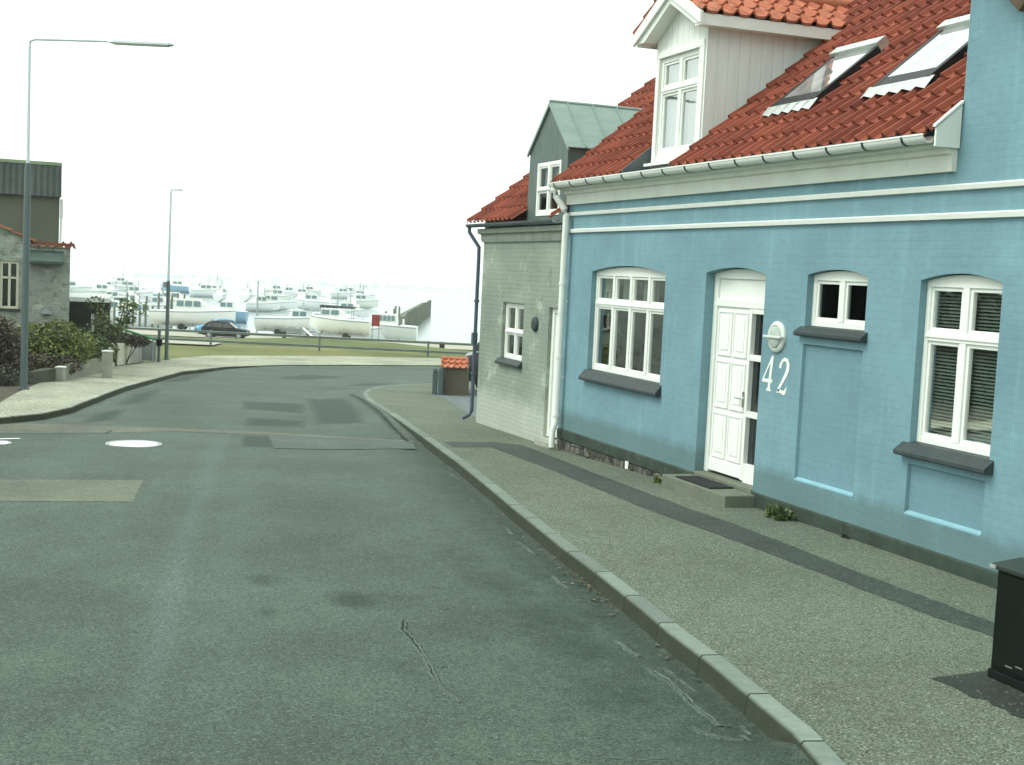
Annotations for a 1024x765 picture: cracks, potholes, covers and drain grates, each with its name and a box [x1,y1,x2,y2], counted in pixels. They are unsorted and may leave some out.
crack [397,607,464,707]
crack [506,667,744,764]
